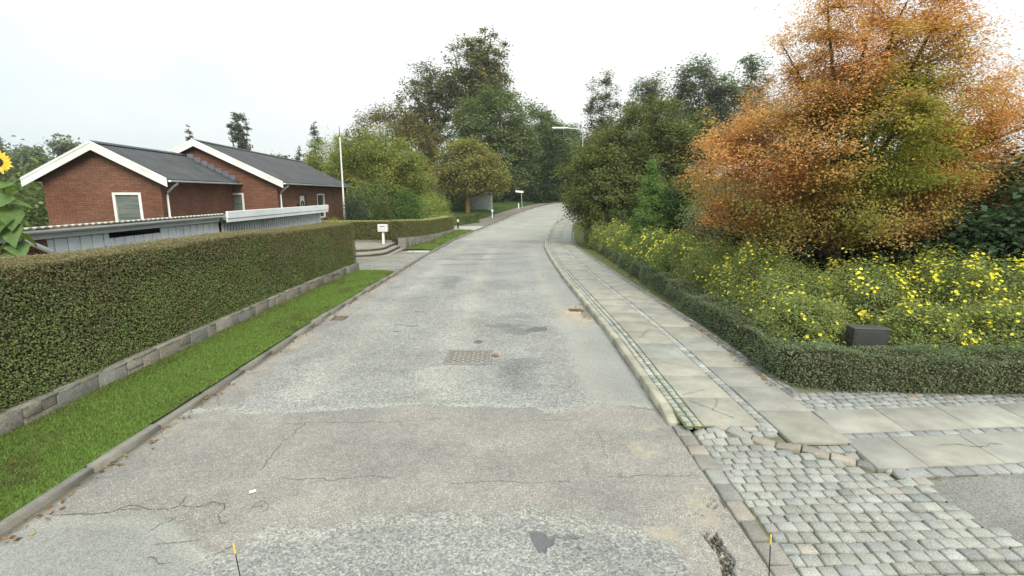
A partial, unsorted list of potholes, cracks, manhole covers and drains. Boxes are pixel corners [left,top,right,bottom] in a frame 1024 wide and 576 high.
manhole cover [443,350,493,365]
pothole [685,525,749,576]
crack [46,497,226,531]
crack [258,418,448,481]
